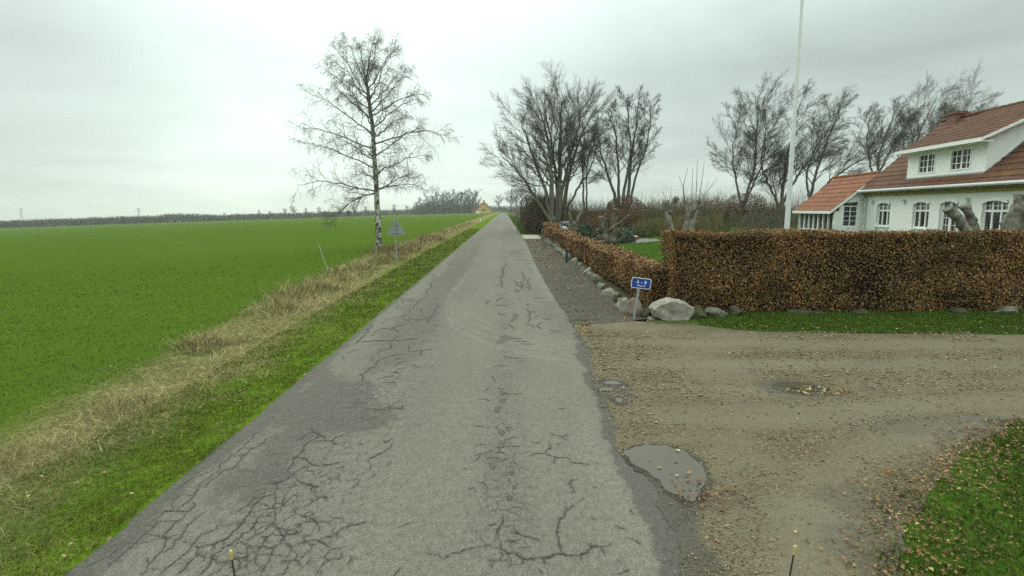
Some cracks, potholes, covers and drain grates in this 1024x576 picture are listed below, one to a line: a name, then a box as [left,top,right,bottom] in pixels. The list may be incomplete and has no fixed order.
pothole [771,381,821,393]
crack [483,250,558,401]
crack [428,428,640,575]
pothole [609,396,629,406]
crack [87,418,392,575]
pothole [597,378,629,388]
pothole [621,443,713,506]
crack [342,274,439,421]
